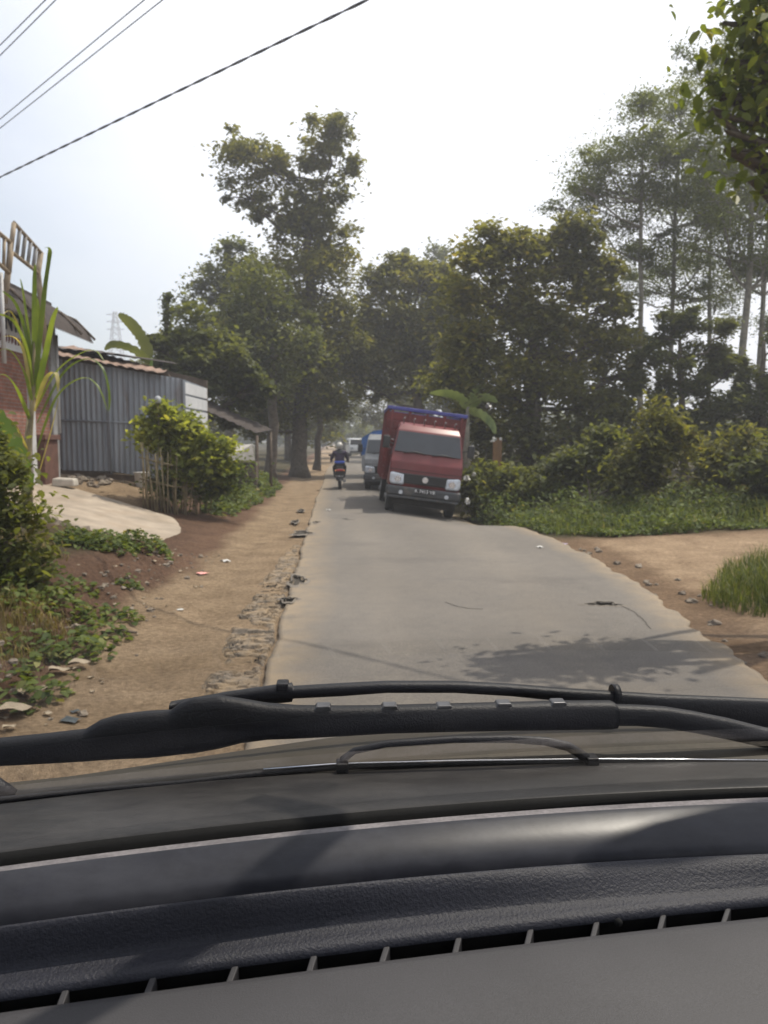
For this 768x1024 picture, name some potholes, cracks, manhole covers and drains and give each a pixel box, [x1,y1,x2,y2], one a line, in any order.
pothole [286,574,311,587]
pothole [276,597,301,606]
